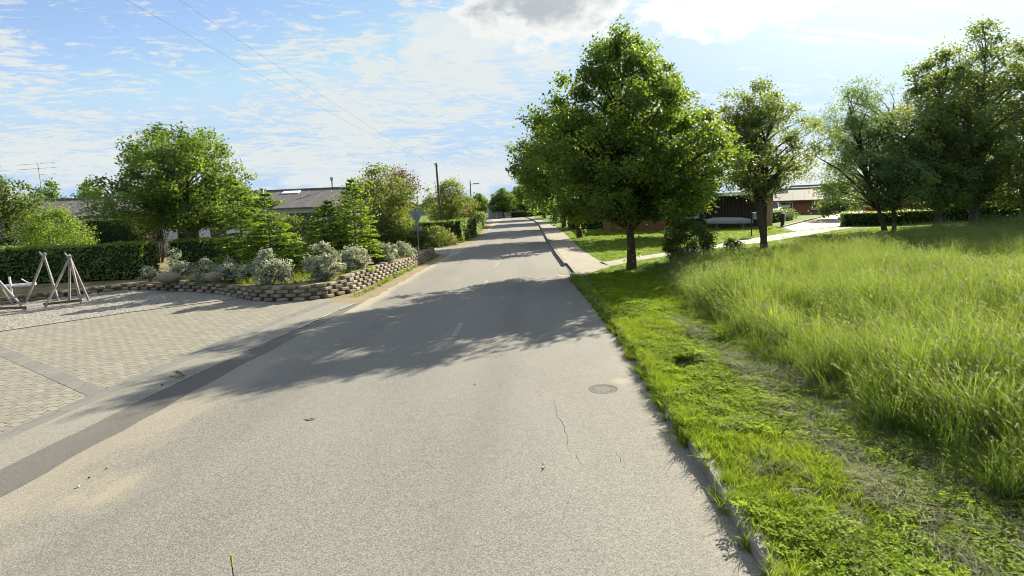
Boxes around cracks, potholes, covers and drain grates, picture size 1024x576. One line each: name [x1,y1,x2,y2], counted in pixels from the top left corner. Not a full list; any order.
manhole cover [587,384,619,394]
